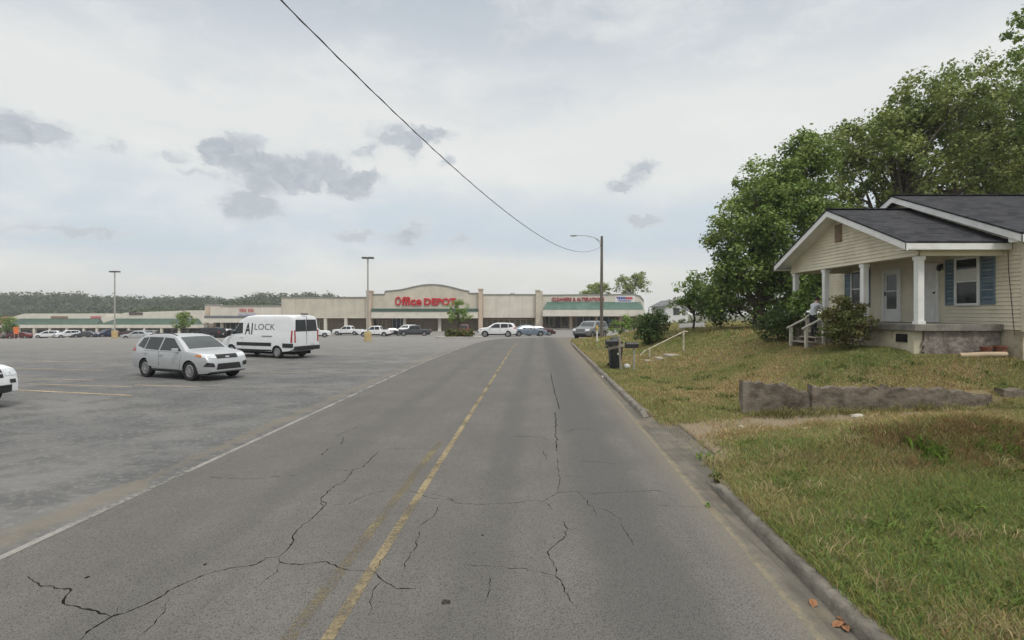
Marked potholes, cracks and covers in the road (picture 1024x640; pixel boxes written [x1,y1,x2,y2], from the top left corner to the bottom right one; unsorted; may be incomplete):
crack [27,377,690,639]
